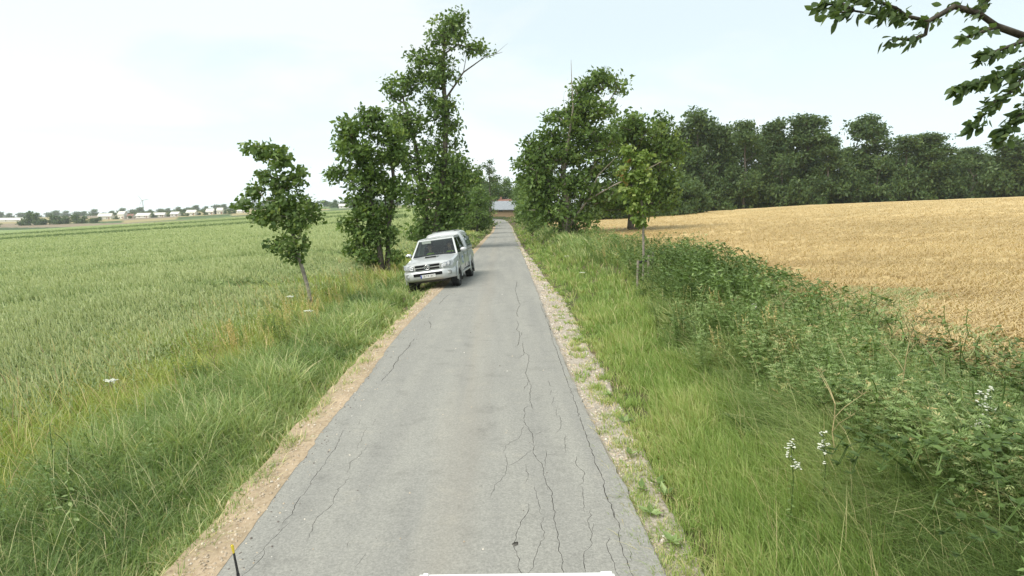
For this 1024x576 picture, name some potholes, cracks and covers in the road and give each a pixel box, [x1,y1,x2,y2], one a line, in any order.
crack [246,428,367,573]
crack [491,285,564,573]
crack [540,304,632,574]
